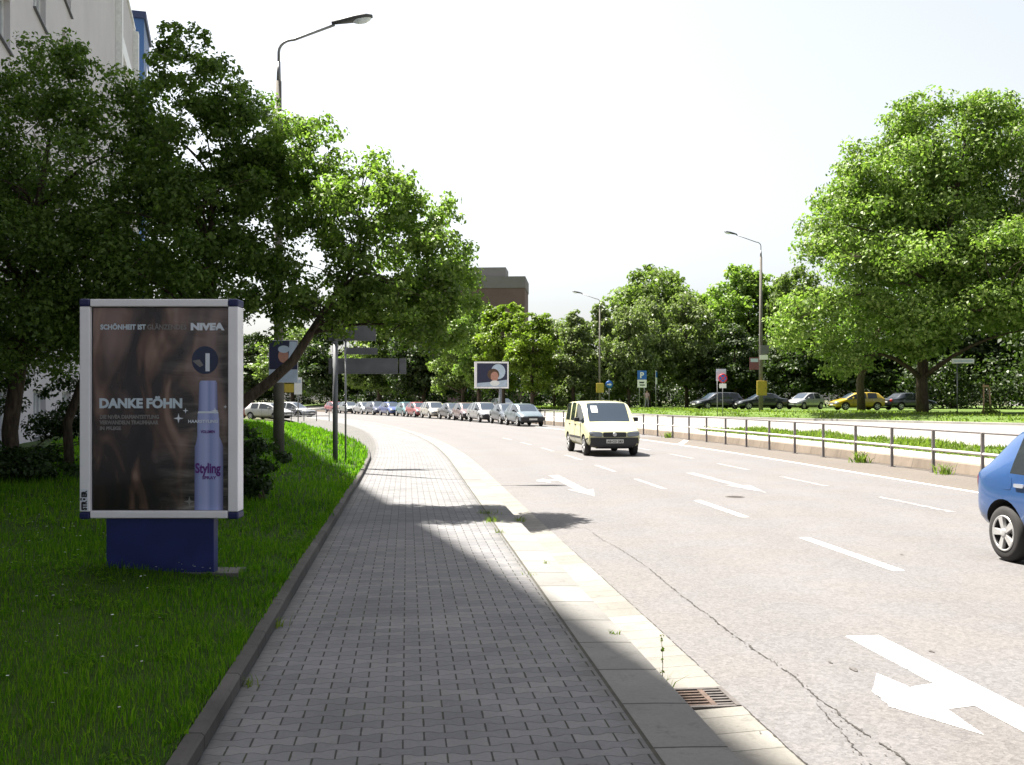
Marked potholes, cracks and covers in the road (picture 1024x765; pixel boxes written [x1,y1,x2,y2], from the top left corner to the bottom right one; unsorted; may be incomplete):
crack [584,527,911,765]
drain grate [674,686,742,710]
